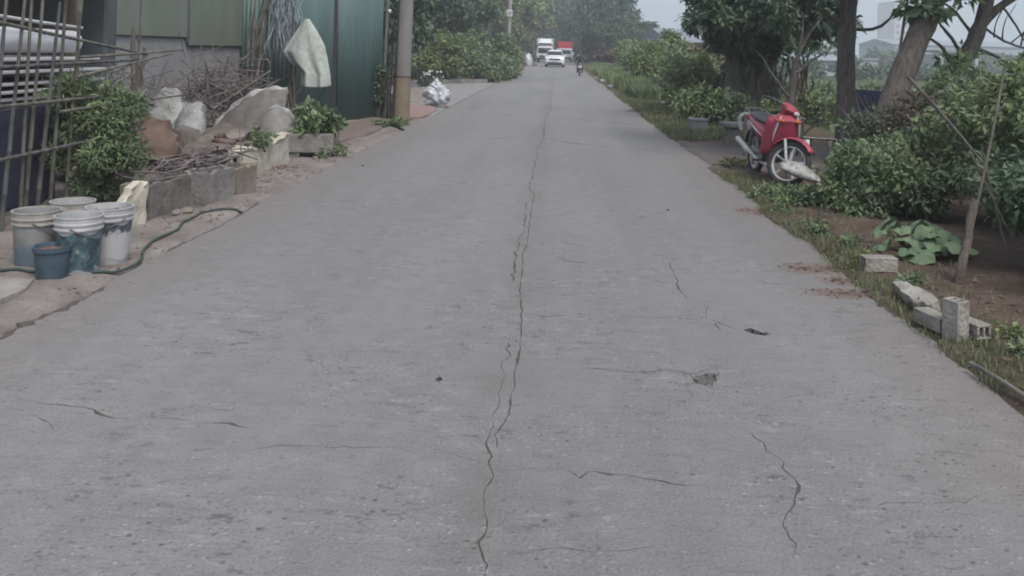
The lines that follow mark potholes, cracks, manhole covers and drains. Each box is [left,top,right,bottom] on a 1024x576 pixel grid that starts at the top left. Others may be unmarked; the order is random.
crack [751,434,801,554]
crack [221,78,567,576]
crack [515,466,695,486]
pothole [695,373,718,386]
crack [588,368,719,389]
crack [633,262,731,329]
crack [34,402,245,430]
